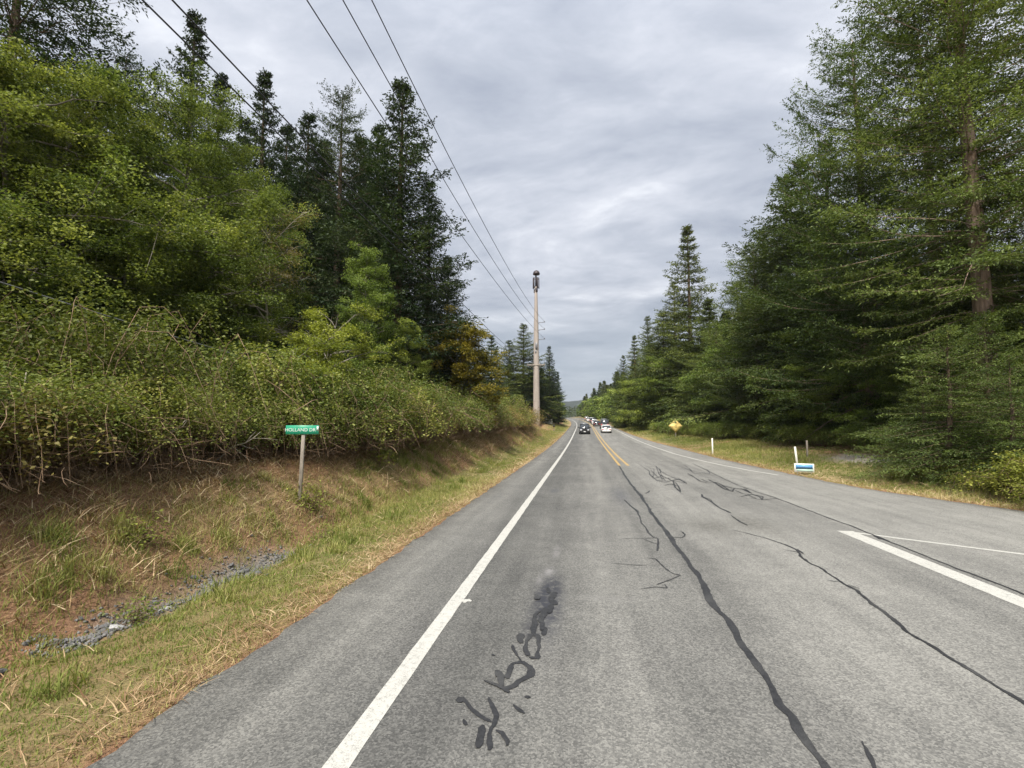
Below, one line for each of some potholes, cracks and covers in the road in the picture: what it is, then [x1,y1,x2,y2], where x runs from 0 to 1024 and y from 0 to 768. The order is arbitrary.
crack [861,741,877,768]
crack [624,465,775,589]
